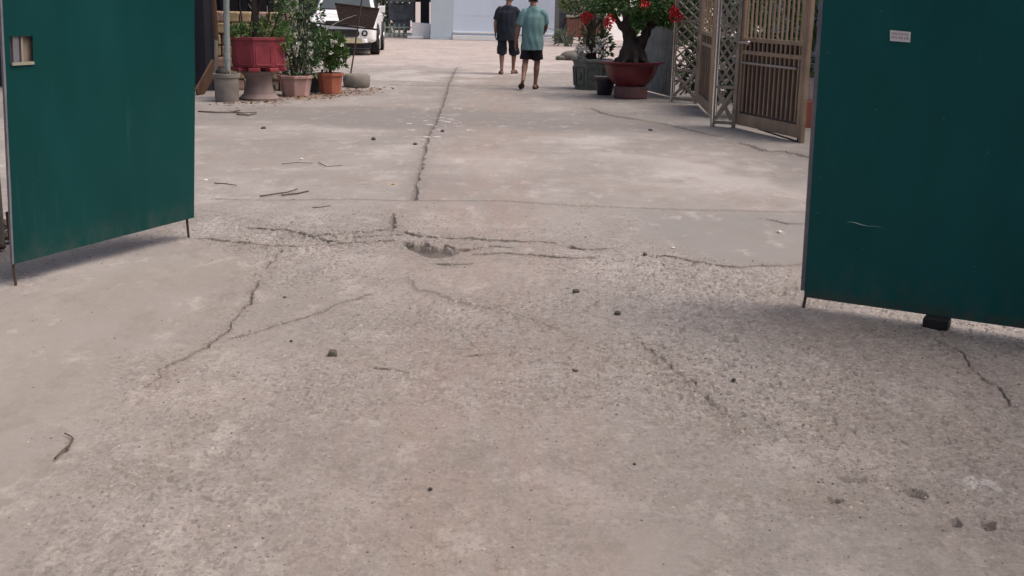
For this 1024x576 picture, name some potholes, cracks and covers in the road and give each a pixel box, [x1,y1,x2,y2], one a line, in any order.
crack [146,67,611,388]
crack [641,345,741,431]
crack [655,255,802,268]
crack [589,108,716,136]
crack [738,142,809,158]
pothole [400,241,459,259]
crack [923,329,1017,409]
